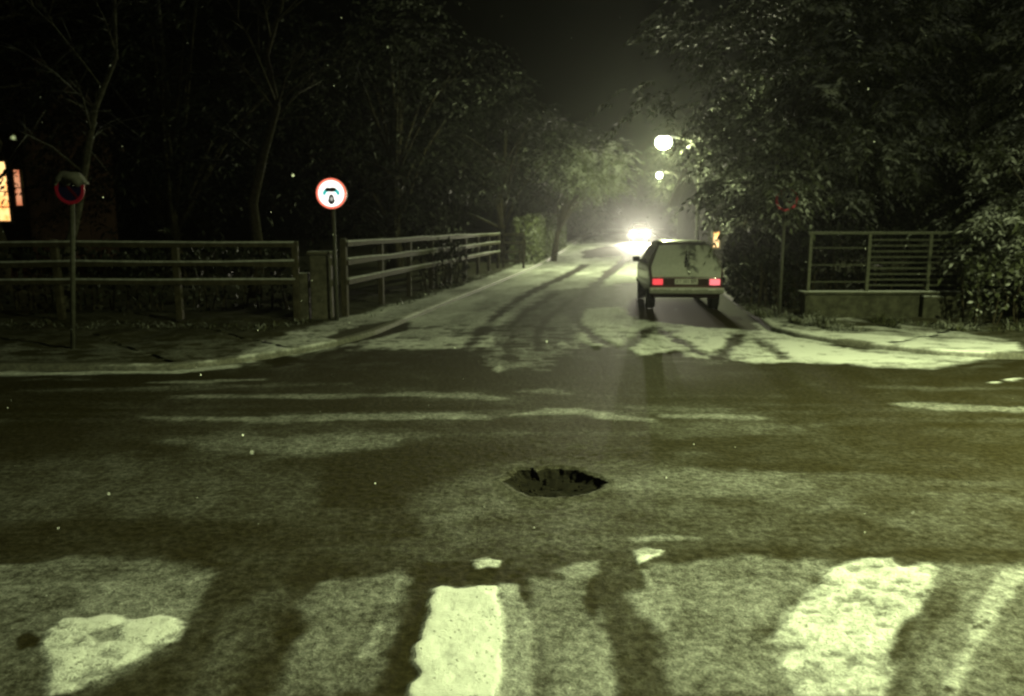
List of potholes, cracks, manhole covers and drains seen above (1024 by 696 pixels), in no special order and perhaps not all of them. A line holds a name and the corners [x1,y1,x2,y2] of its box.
pothole [495,465,616,499]
